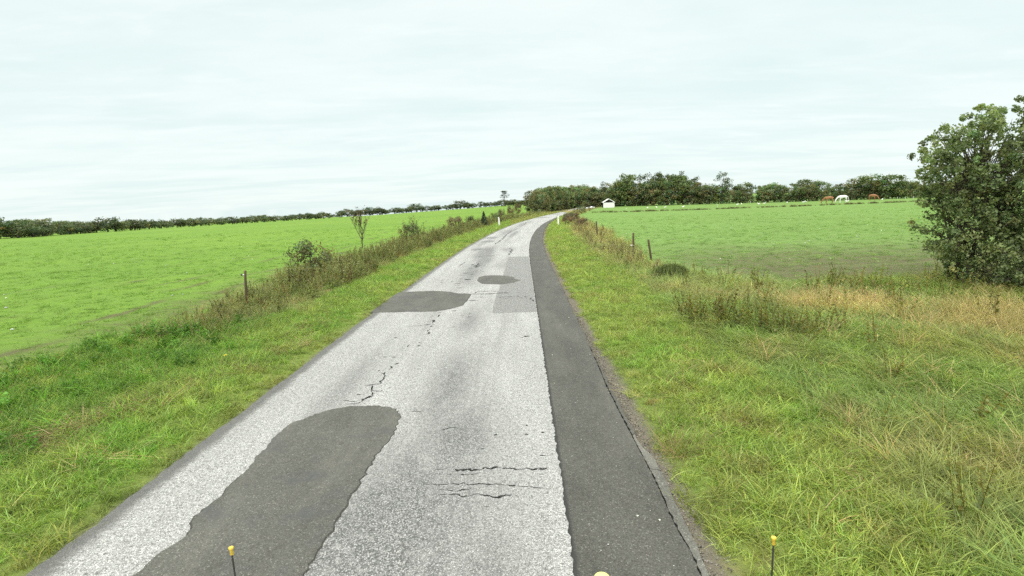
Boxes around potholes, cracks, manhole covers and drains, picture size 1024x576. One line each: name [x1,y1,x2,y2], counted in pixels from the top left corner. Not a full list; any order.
crack [433,466,546,498]
